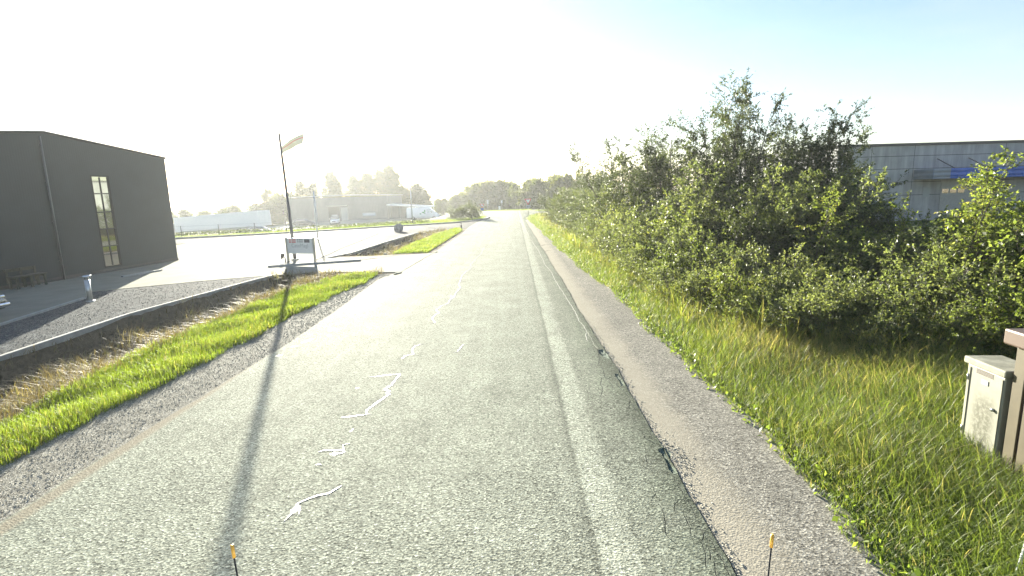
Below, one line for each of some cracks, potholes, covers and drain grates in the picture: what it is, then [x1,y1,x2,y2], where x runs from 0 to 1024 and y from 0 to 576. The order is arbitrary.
crack [284,485,342,521]
crack [432,246,485,322]
crack [643,433,730,576]
crack [519,220,637,411]
crack [317,344,422,466]
